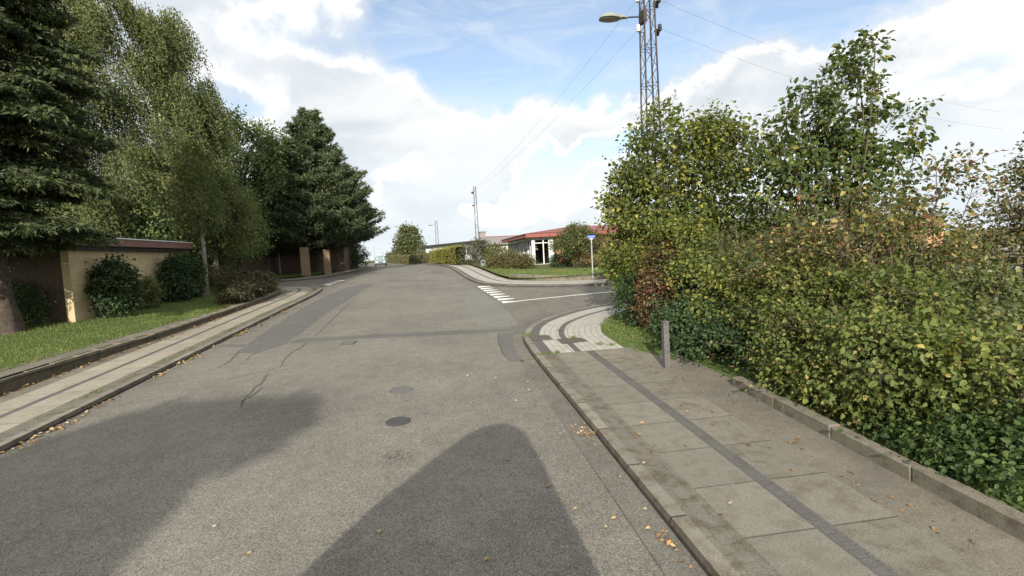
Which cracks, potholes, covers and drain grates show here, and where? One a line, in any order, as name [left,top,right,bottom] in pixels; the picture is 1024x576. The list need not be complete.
manhole cover [386,416,411,426]
crack [218,342,307,408]
manhole cover [389,386,413,394]
